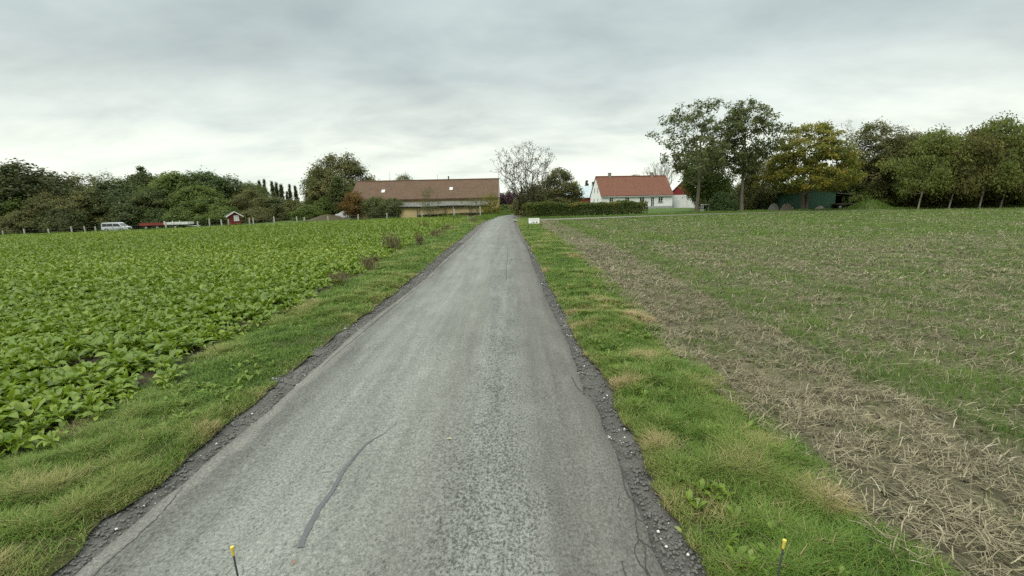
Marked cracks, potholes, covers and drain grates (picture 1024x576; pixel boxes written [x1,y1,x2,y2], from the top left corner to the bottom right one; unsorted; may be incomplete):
crack [617,473,658,576]
